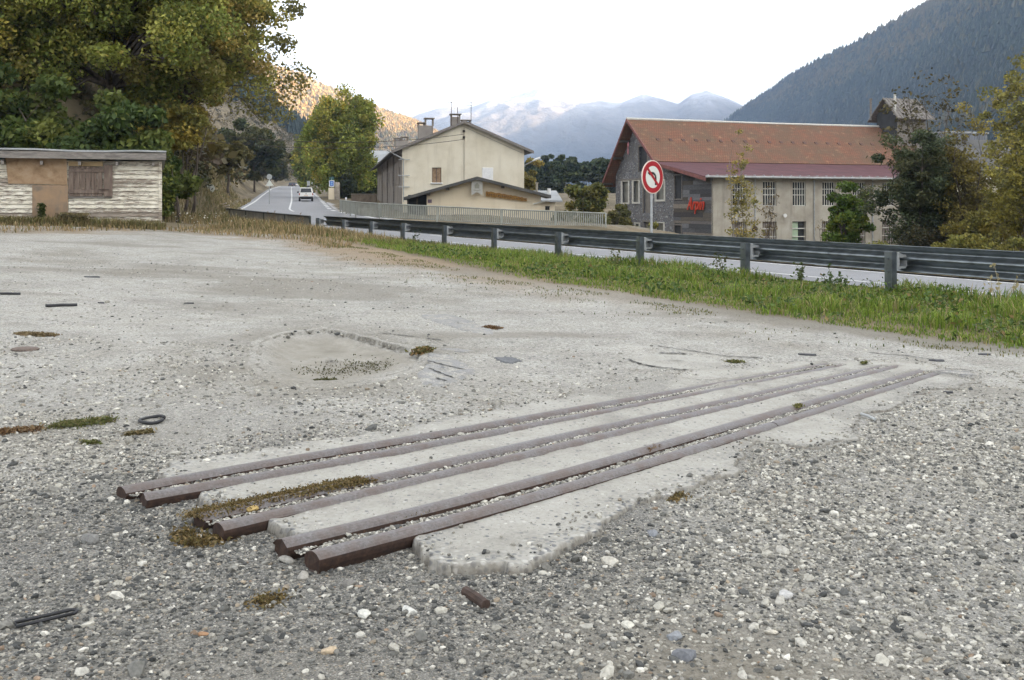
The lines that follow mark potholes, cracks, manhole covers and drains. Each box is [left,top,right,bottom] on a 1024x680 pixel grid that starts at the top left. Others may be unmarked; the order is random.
pothole [245,327,432,389]
crack [427,360,463,381]
crack [630,345,760,370]
